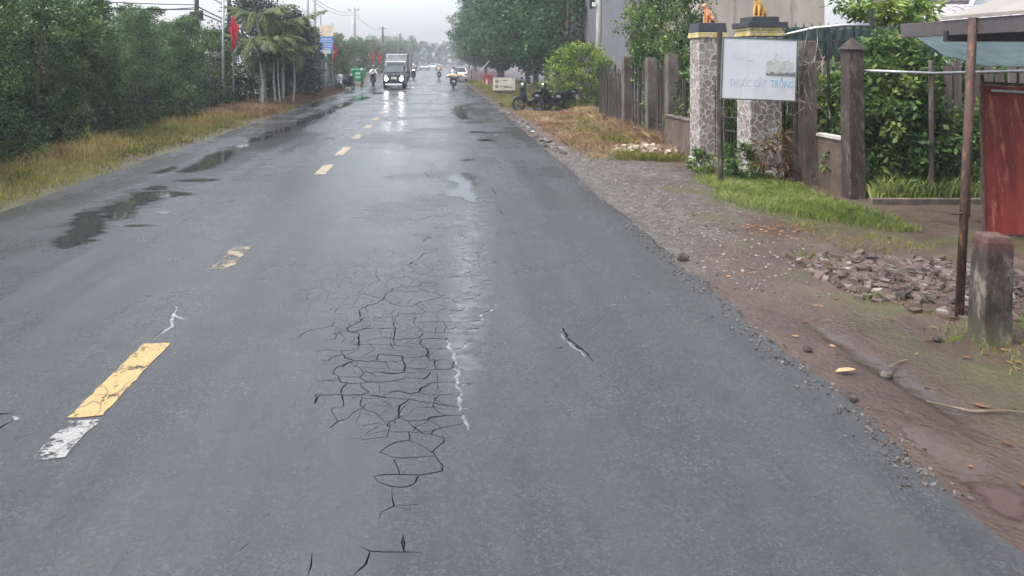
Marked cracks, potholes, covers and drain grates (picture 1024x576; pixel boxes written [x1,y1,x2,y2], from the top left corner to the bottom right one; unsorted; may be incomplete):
crack [557,328,594,363]
crack [144,297,187,340]
crack [290,152,534,576]
crack [0,411,20,452]
